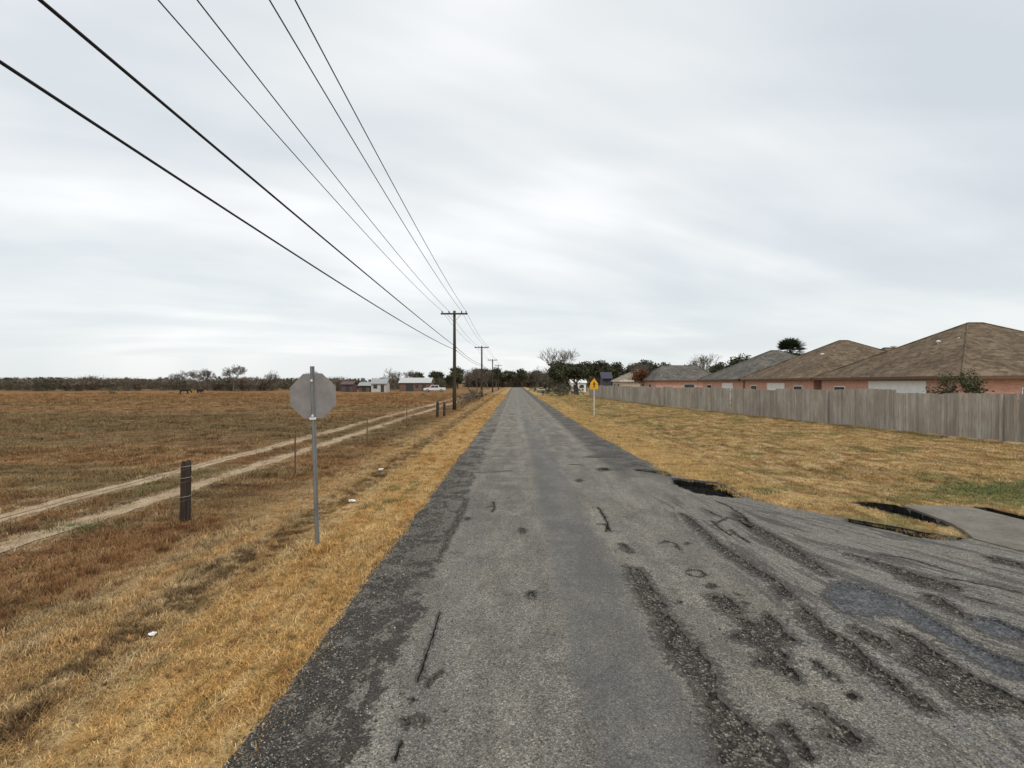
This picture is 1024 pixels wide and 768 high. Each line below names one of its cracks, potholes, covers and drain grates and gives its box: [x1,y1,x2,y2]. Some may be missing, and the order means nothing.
crack [393,740,403,761]
pothole [703,692,790,768]
crack [417,612,441,683]
pothole [775,722,815,762]
pothole [628,567,718,691]
pothole [847,519,962,540]
pothole [973,507,1024,520]
crack [597,507,611,532]
pothole [709,595,741,614]
pothole [730,614,800,682]
pothole [800,606,939,713]
